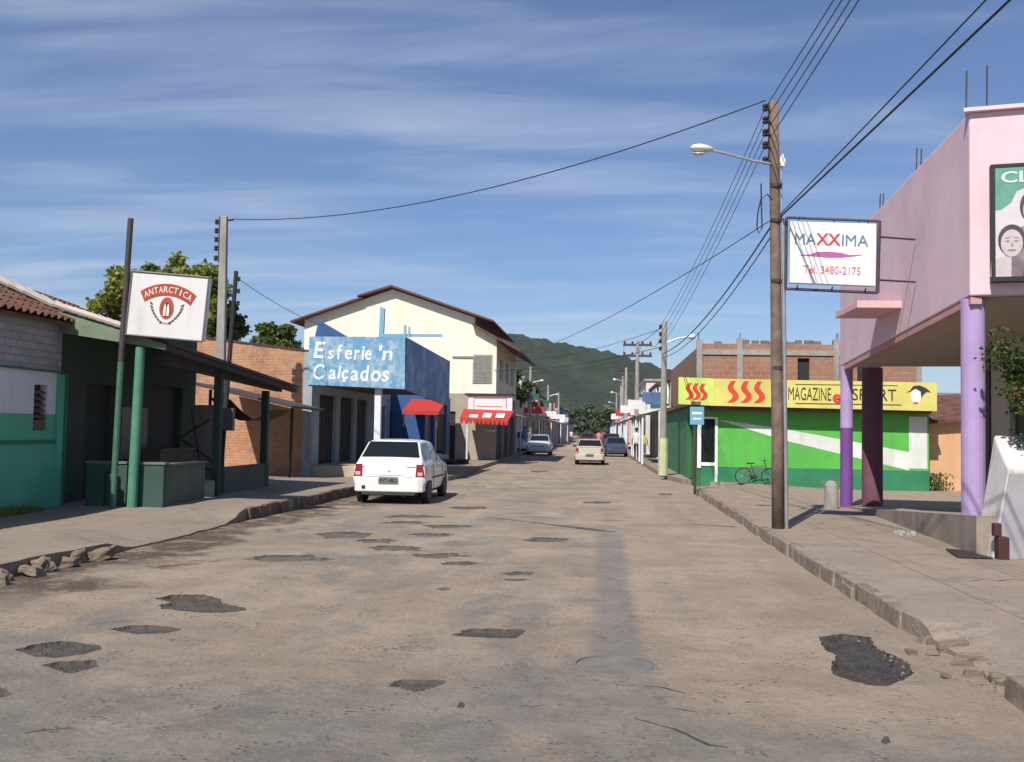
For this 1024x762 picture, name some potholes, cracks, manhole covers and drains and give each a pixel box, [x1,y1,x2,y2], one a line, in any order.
pothole [452,628,526,638]
pothole [819,634,914,686]
manhole cover [573,655,658,675]
pothole [316,531,374,539]
pothole [156,594,247,613]
crack [634,686,728,748]
pothole [42,660,99,674]
pothole [109,625,182,634]
pothole [388,680,447,692]
pothole [15,641,102,658]
